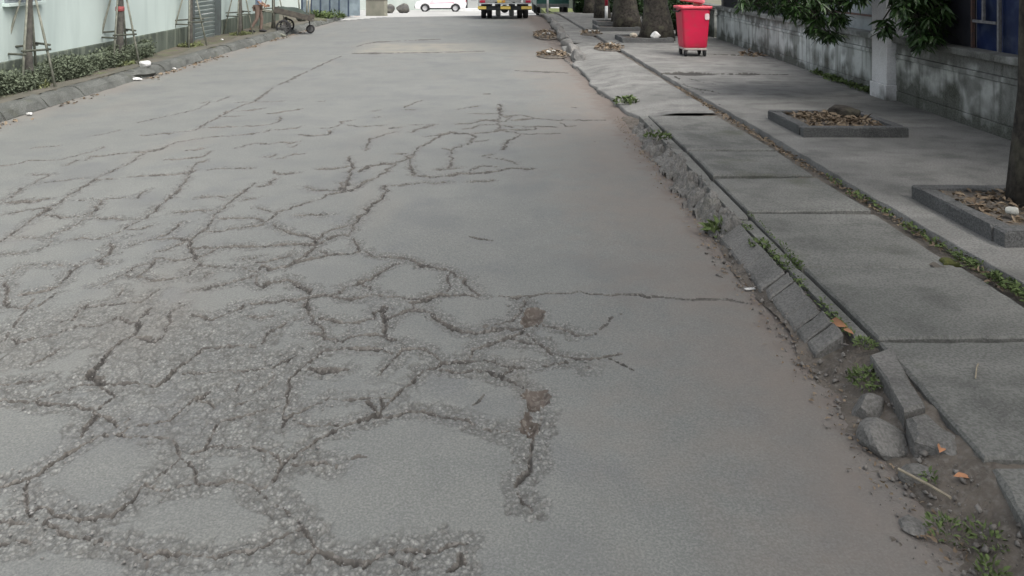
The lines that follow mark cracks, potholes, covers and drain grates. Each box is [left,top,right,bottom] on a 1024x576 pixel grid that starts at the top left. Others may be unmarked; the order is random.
pothole [520,307,546,328]
crack [0,88,748,573]
pothole [518,412,539,440]
pothole [520,389,552,413]
